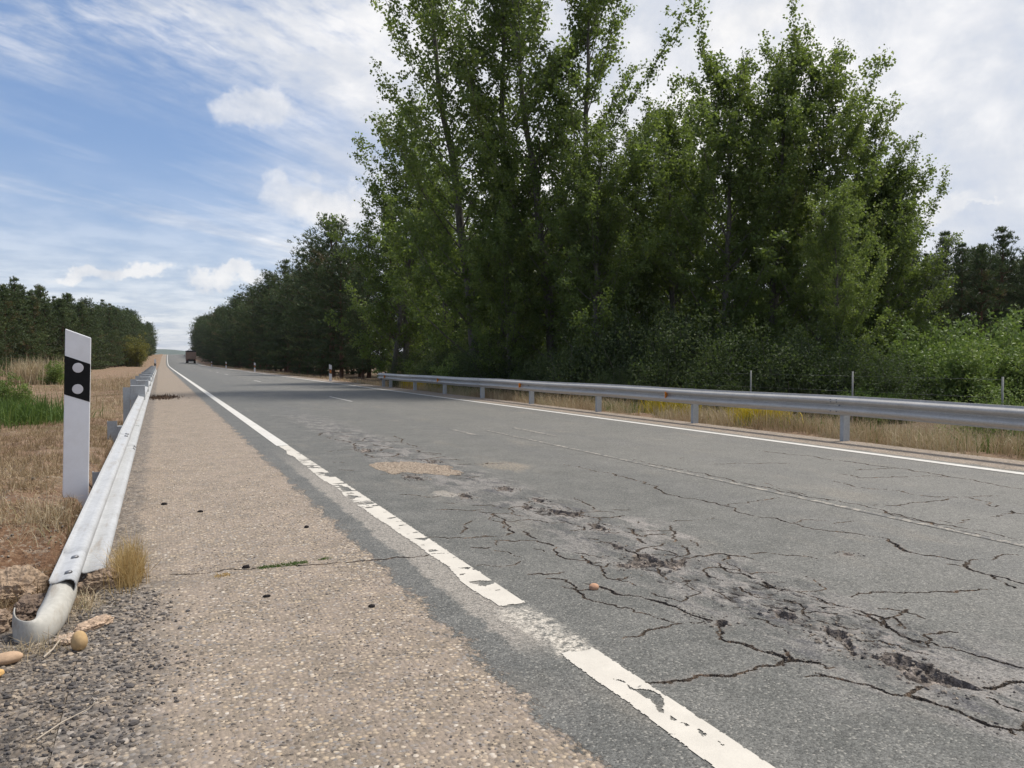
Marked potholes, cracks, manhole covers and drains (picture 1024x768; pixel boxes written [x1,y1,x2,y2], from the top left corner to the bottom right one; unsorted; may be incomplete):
pothole [548,509,581,517]
crack [320,432,501,478]
crack [170,450,1024,735]
pothole [870,652,984,691]
pothole [773,610,799,622]
pothole [823,626,859,657]
